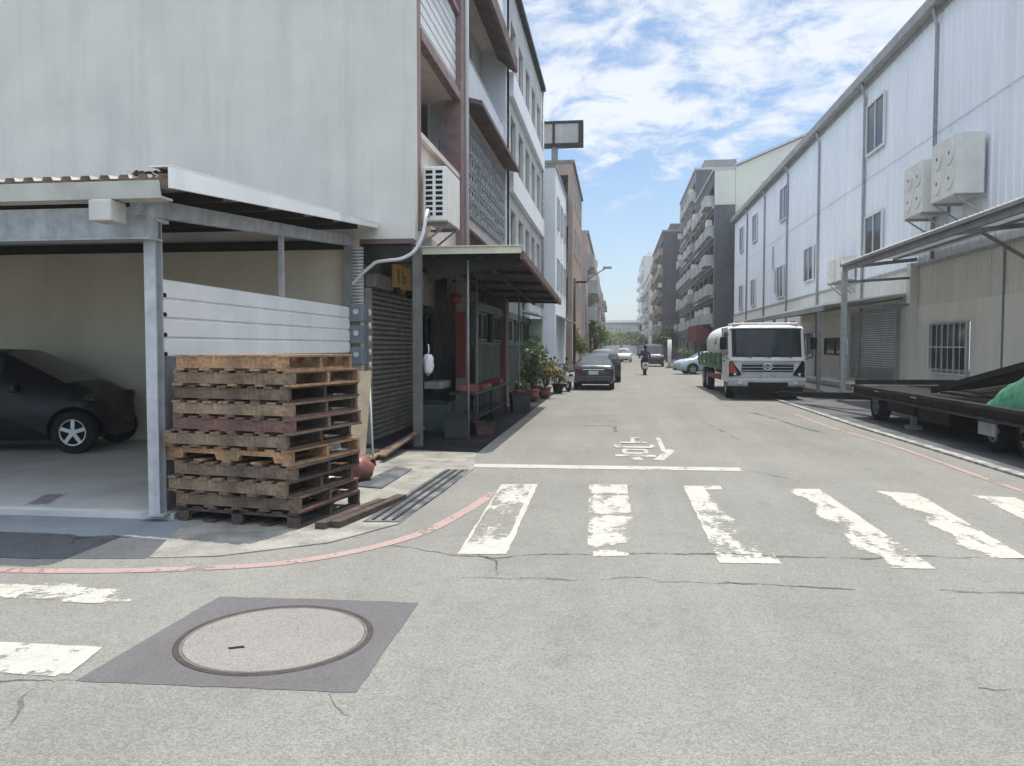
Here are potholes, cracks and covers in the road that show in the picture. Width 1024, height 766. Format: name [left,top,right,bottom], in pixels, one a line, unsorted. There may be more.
crack [394,545,1021,590]
crack [0,679,71,733]
manhole cover [172,605,373,676]
crack [754,413,819,432]
